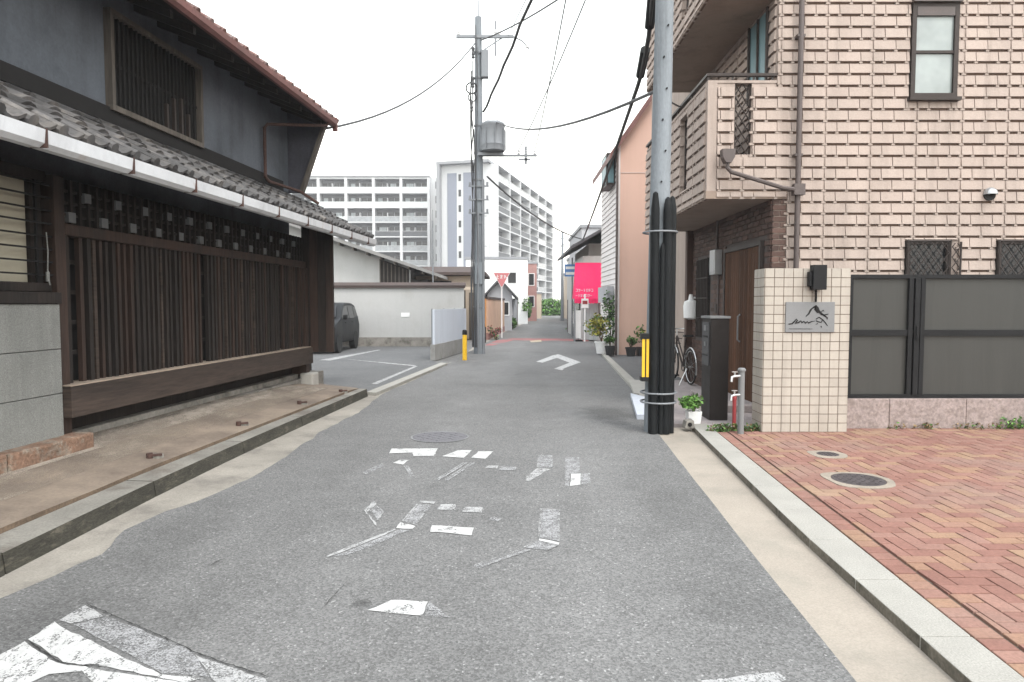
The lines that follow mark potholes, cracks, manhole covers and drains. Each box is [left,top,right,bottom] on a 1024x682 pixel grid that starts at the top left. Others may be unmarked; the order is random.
manhole cover [807,450,848,459]
manhole cover [820,472,896,489]
manhole cover [411,431,469,442]
crack [28,639,96,666]
